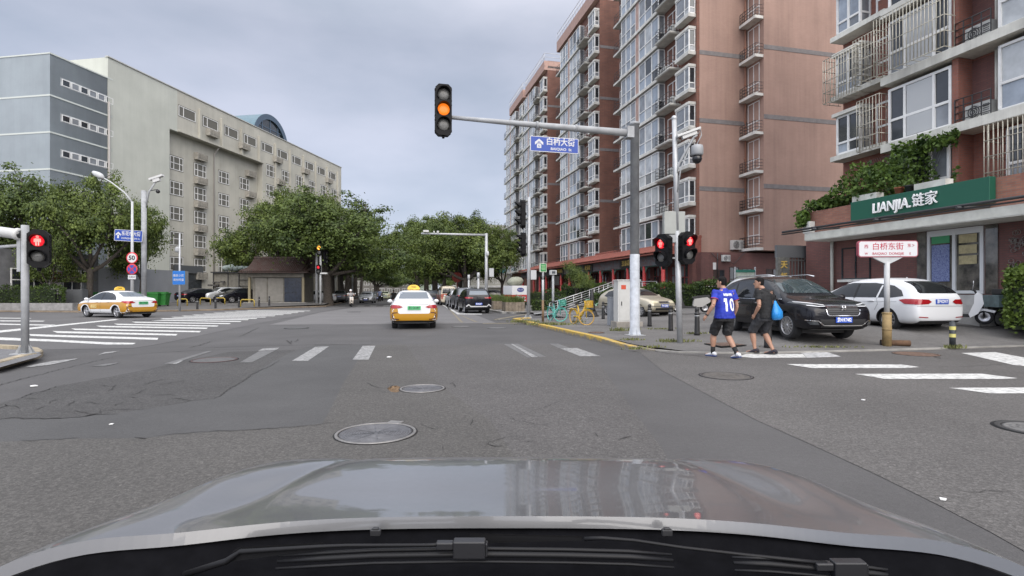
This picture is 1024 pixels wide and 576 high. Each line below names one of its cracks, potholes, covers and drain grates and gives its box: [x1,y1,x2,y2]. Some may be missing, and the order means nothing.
manhole cover [399,384,446,393]
crack [0,329,308,419]
manhole cover [990,420,1024,434]
manhole cover [333,420,418,445]
manhole cover [698,372,754,380]
